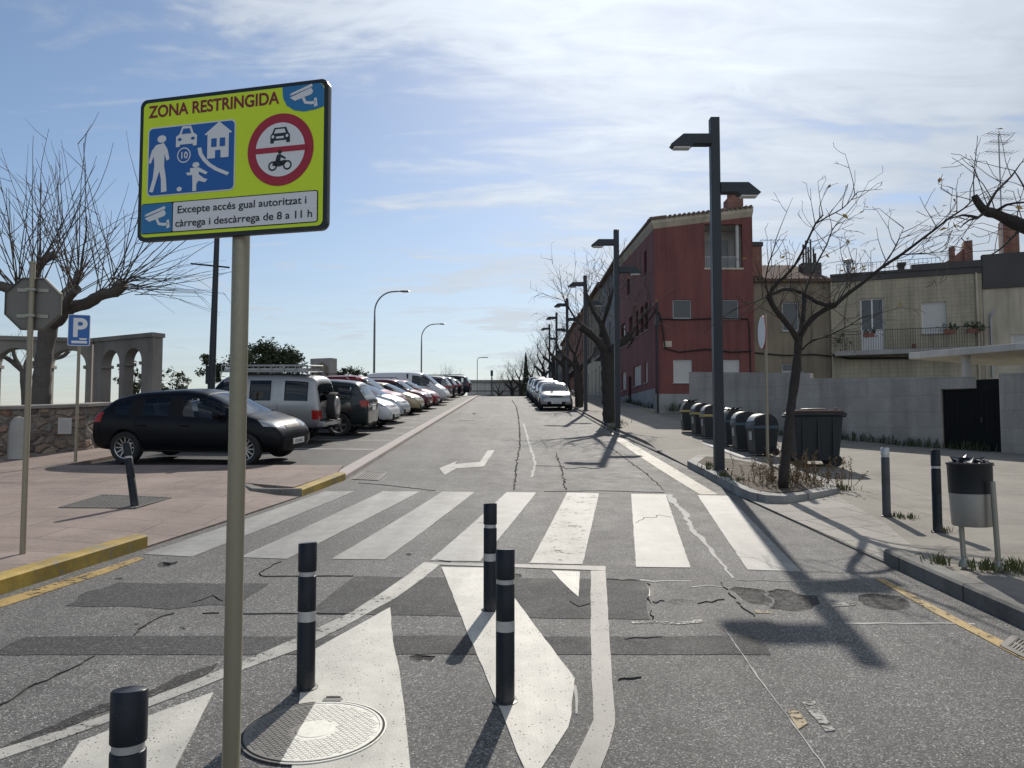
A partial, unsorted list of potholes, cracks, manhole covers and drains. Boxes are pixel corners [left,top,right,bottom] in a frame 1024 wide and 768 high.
utility cover [58,494,172,509]
crack [0,655,95,706]
crack [697,580,826,768]
drain grate [1000,634,1024,658]
crack [133,613,174,636]
drain grate [353,471,388,481]
crack [544,441,664,493]
manhole cover [241,696,387,765]
